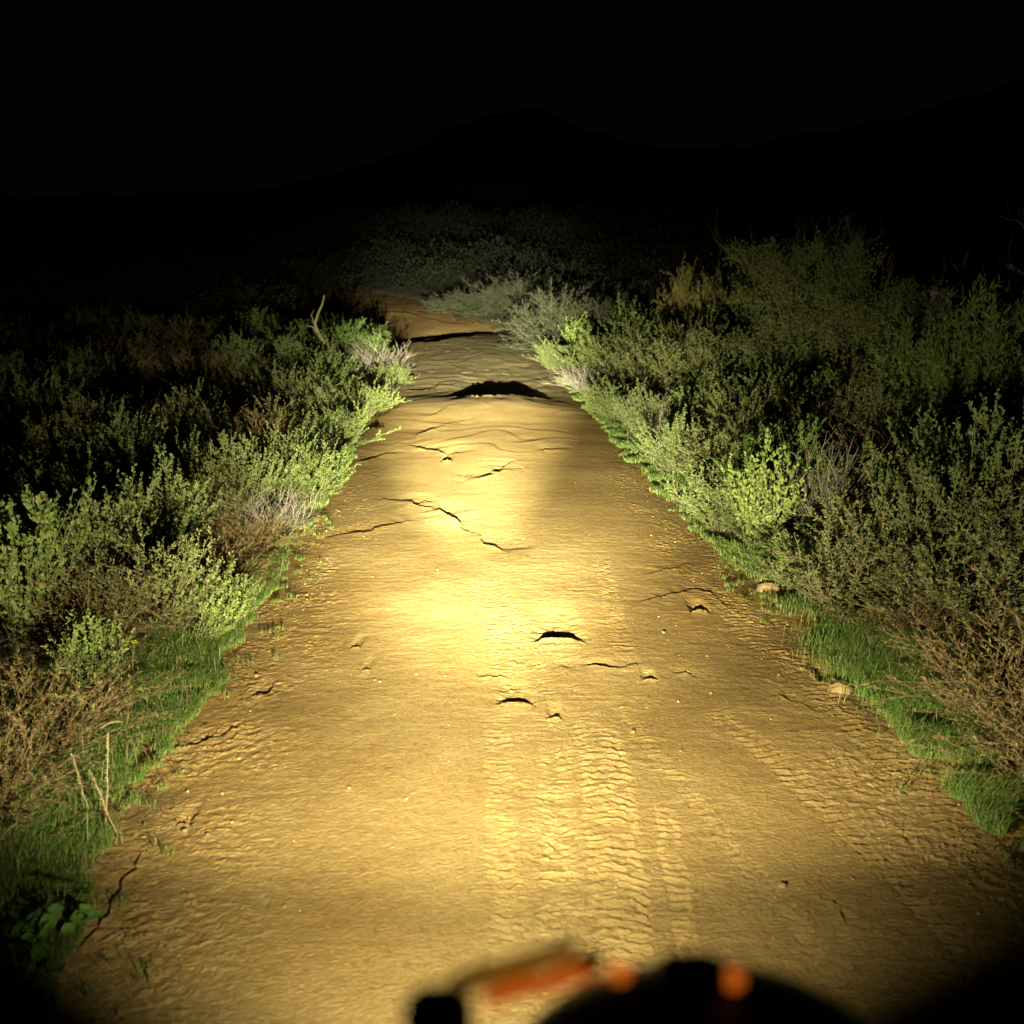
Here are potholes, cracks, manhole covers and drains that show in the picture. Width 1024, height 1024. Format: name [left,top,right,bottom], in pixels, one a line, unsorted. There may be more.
pothole [544,712,565,722]
pothole [530,626,590,647]
crack [630,561,731,606]
pothole [492,692,538,710]
crack [551,661,645,670]
crack [322,380,577,551]
crack [155,724,245,758]
pothole [445,382,552,403]
crack [63,845,145,962]
pothole [689,606,713,615]
